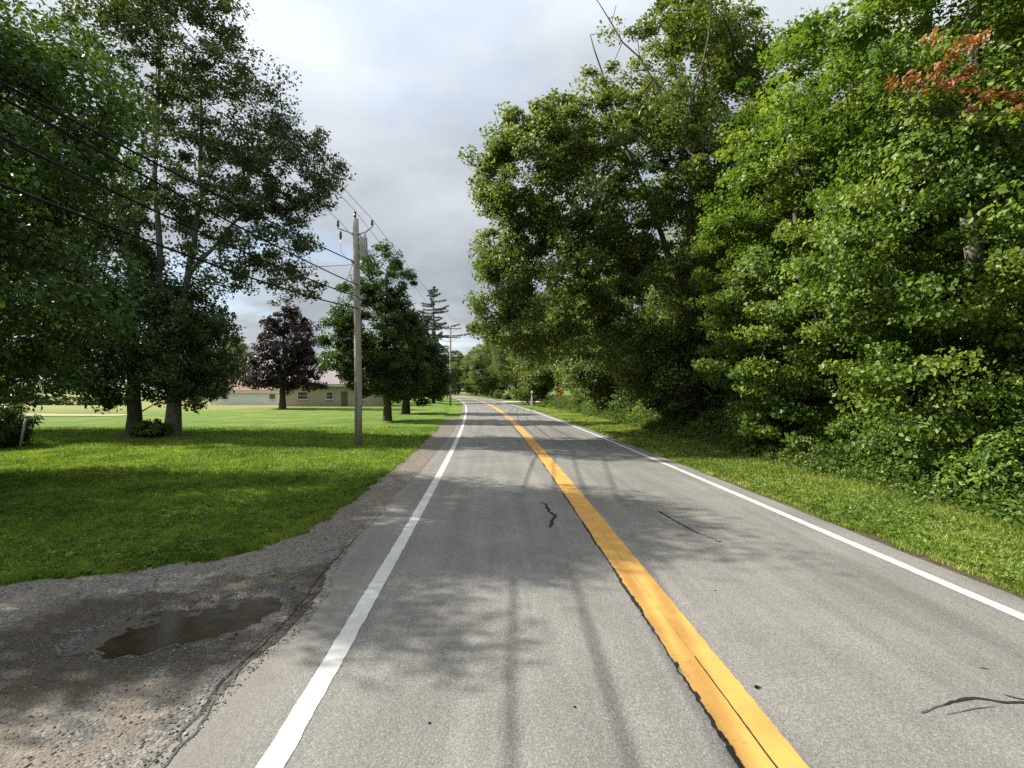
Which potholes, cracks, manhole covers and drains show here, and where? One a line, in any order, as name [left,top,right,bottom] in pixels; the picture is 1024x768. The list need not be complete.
pothole [53,585,301,662]
